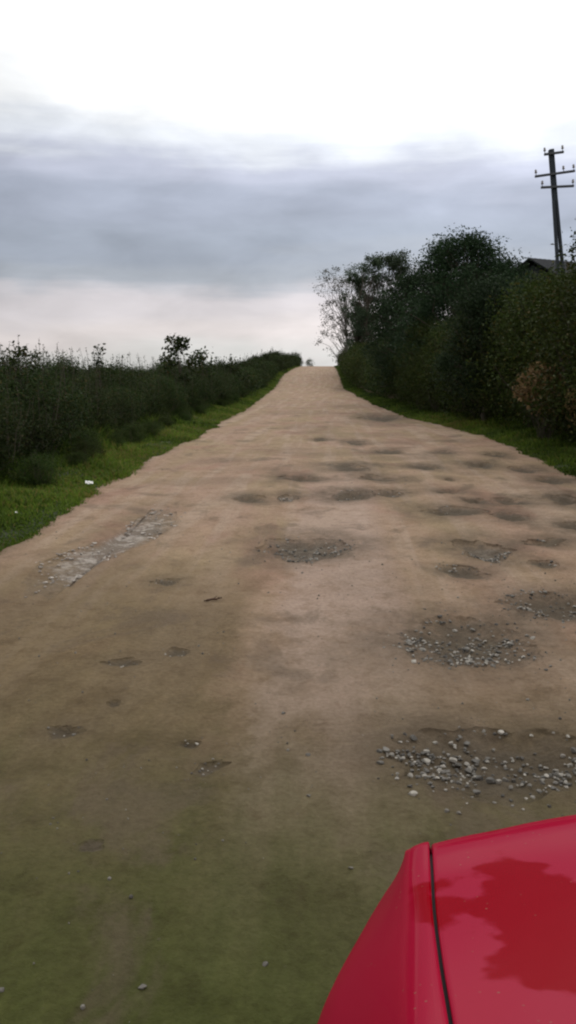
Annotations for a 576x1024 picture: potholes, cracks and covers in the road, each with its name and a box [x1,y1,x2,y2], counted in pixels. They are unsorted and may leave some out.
pothole [277,494,300,502]
pothole [164,646,190,657]
pothole [99,657,142,668]
pothole [326,489,377,501]
pothole [450,539,518,565]
pothole [435,564,492,580]
pothole [417,506,494,516]
pothole [373,489,405,498]
pothole [493,586,576,628]
pothole [521,537,566,547]
pothole [255,536,359,564]
pothole [190,758,232,778]
